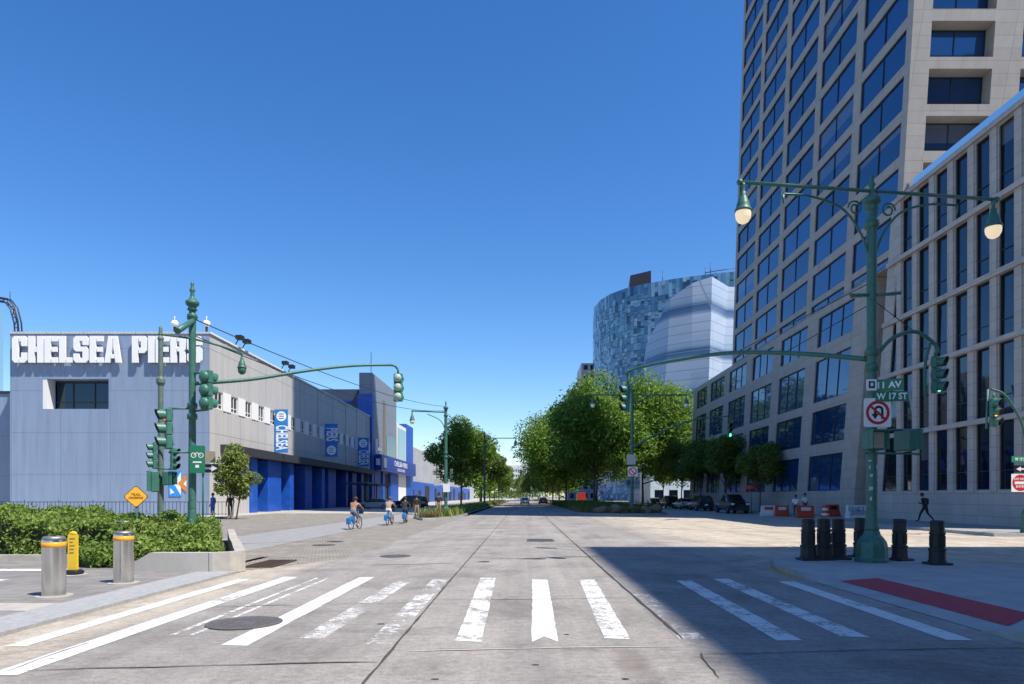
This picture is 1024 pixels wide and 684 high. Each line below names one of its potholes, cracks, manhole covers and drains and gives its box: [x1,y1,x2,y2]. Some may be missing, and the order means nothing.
crack [701,648,953,677]
manhole cover [205,616,283,630]
